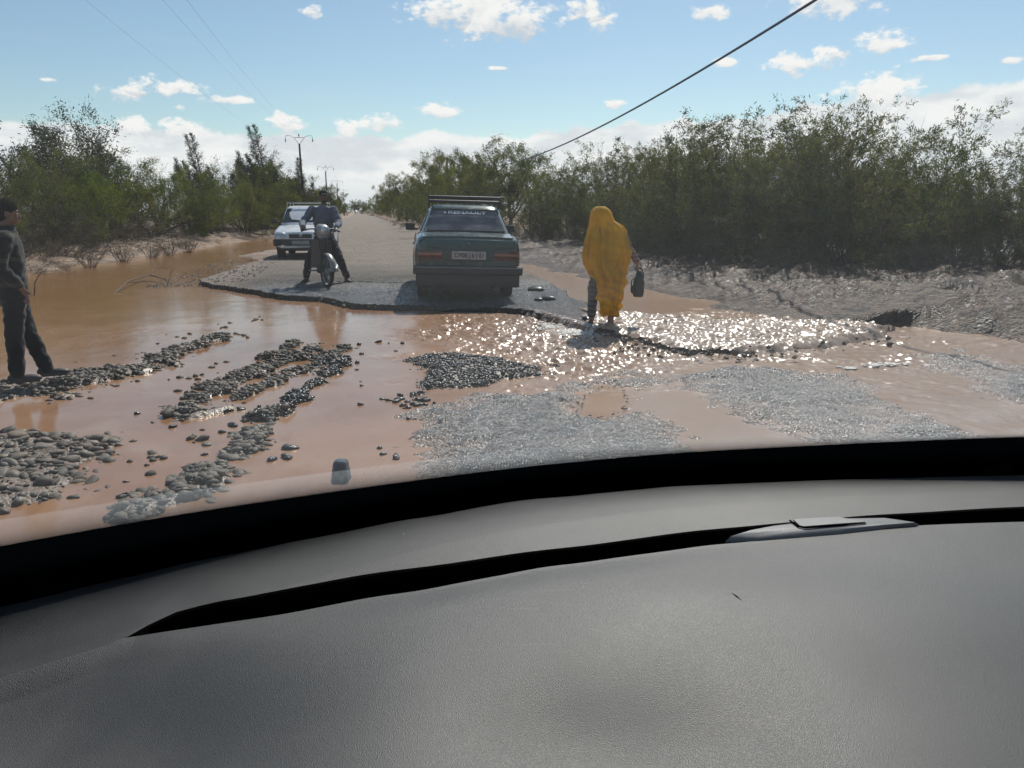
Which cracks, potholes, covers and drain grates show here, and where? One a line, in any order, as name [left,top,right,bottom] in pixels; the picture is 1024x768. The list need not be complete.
pothole [0,280,910,518]
